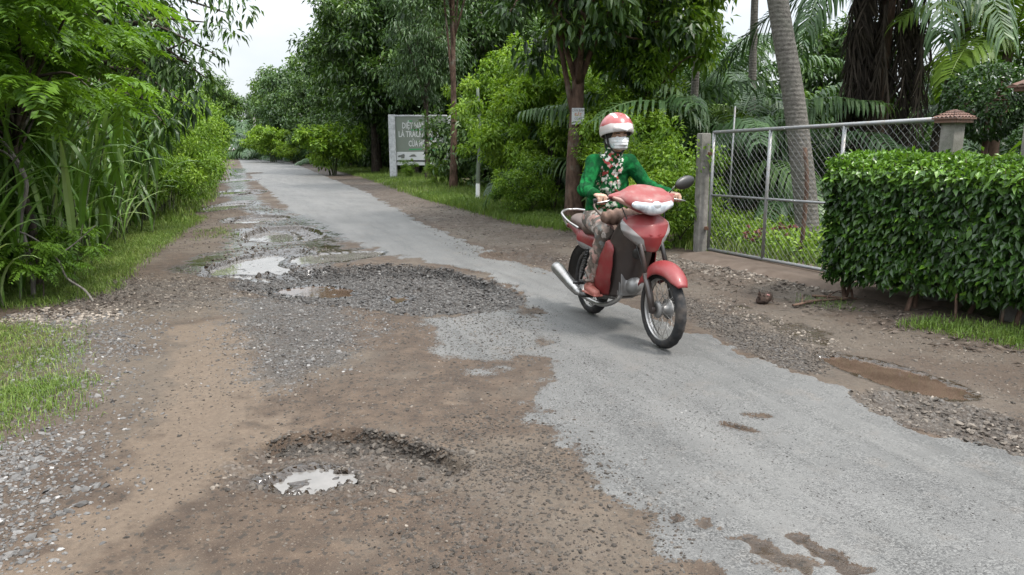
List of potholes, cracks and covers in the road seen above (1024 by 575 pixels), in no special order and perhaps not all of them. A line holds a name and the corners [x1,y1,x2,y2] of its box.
pothole [209,427,476,508]
pothole [813,351,985,404]
pothole [217,189,269,197]
pothole [226,263,528,317]
pothole [195,247,324,280]
pothole [240,225,327,244]
